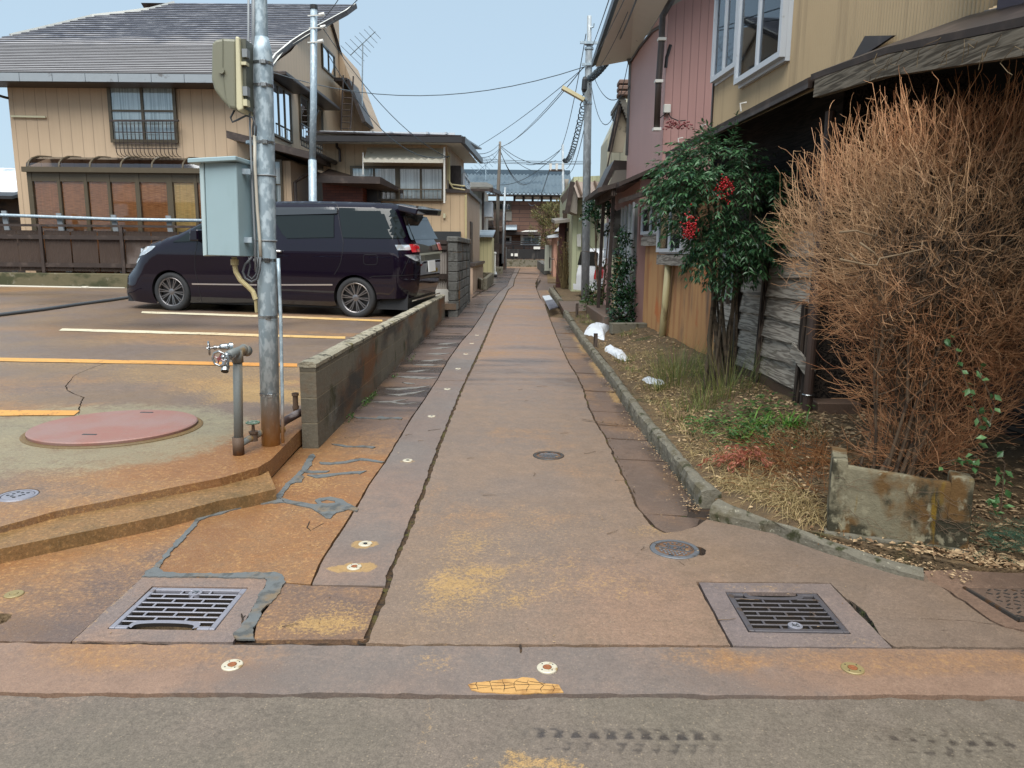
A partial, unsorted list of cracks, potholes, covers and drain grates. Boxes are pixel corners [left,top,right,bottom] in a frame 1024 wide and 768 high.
drain grate [109,587,247,630]
manhole cover [533,451,564,460]
drain grate [726,592,850,634]
manhole cover [650,540,700,560]
manhole cover [19,410,203,449]
